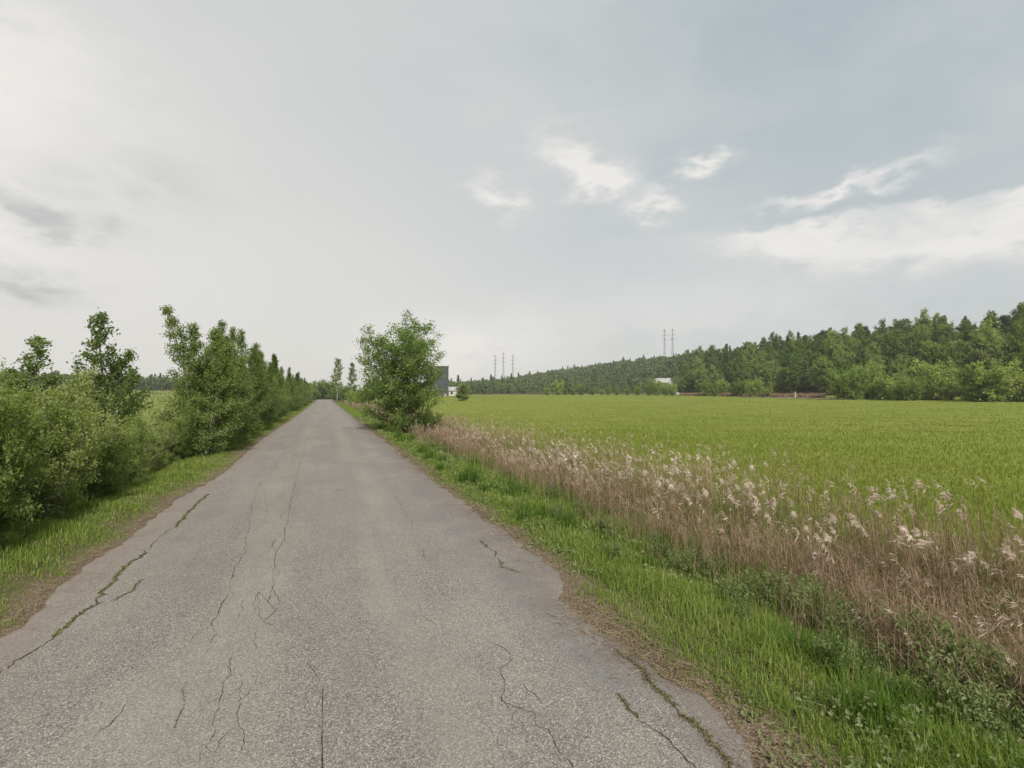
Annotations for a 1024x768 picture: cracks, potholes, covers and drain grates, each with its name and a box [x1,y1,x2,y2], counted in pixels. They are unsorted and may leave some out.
crack [198,657,257,763]
crack [614,649,740,768]
crack [308,664,324,768]
crack [480,540,522,572]
crack [191,416,308,651]
crack [495,643,573,767]
crack [0,493,209,672]
